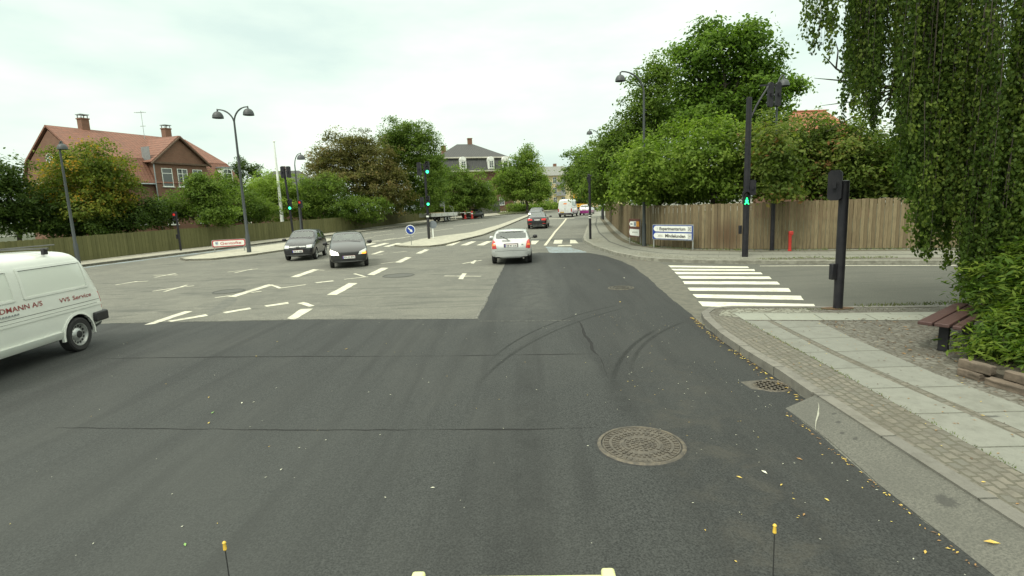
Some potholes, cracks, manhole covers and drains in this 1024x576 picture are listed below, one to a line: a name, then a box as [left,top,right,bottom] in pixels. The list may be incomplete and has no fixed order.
crack [579,322,606,372]
manhole cover [594,425,690,467]
drain grate [741,380,791,392]
